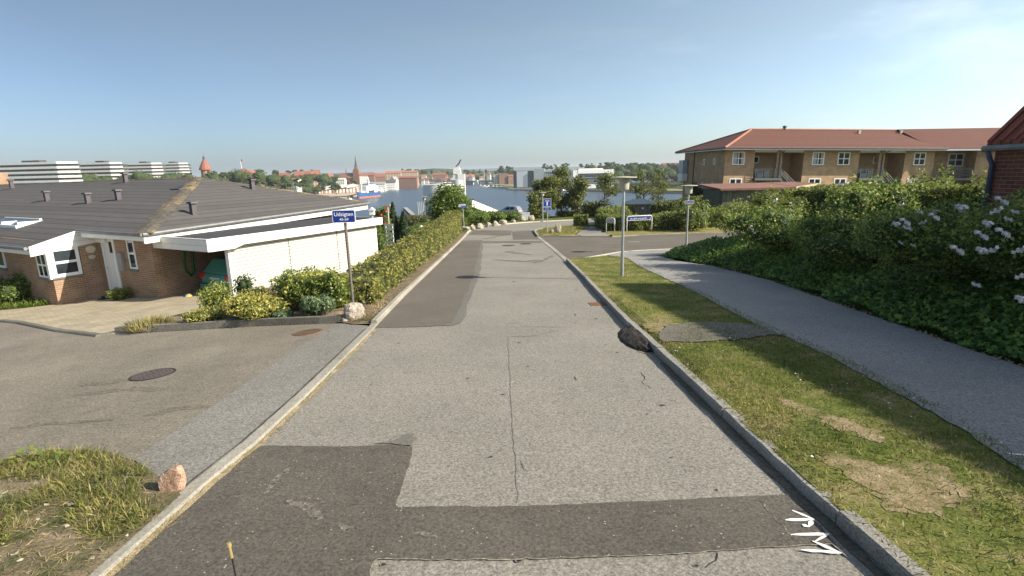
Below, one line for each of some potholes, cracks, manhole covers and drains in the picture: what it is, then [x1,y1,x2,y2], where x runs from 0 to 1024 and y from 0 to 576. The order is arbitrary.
manhole cover [128,368,176,381]
